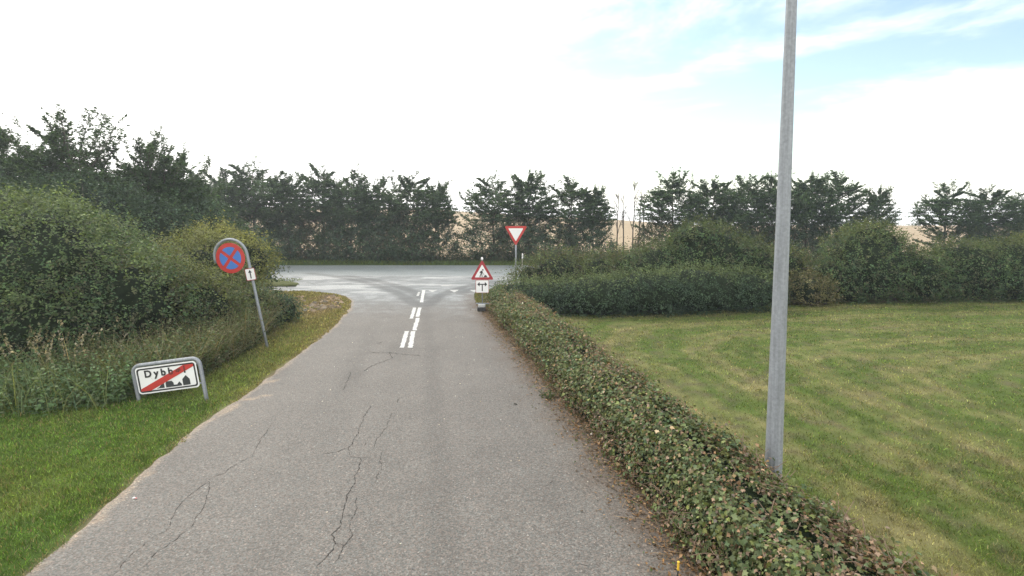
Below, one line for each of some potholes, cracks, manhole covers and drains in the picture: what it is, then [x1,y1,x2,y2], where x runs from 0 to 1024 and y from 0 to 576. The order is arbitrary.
crack [120,424,272,567]
crack [318,402,398,565]
